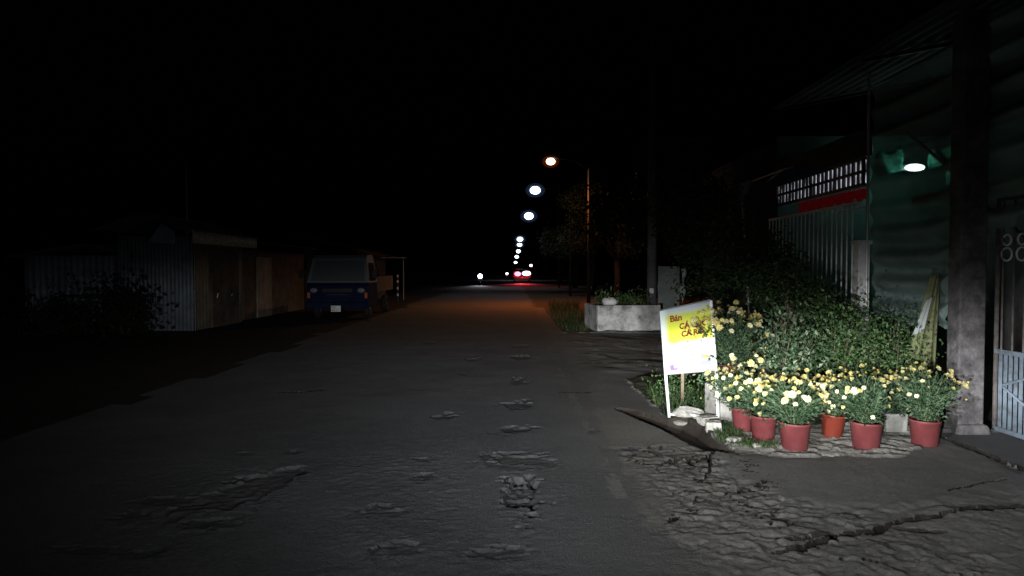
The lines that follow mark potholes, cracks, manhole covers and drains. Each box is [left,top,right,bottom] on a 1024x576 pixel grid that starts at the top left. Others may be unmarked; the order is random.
pothole [429,411,460,421]
pothole [103,509,159,523]
pothole [510,376,530,386]
pothole [363,536,426,562]
pothole [498,474,556,529]
pothole [487,424,544,436]
pothole [150,464,316,523]
pothole [497,398,536,410]
pothole [121,493,202,507]
pothole [161,516,255,531]
crack [615,446,1024,563]
